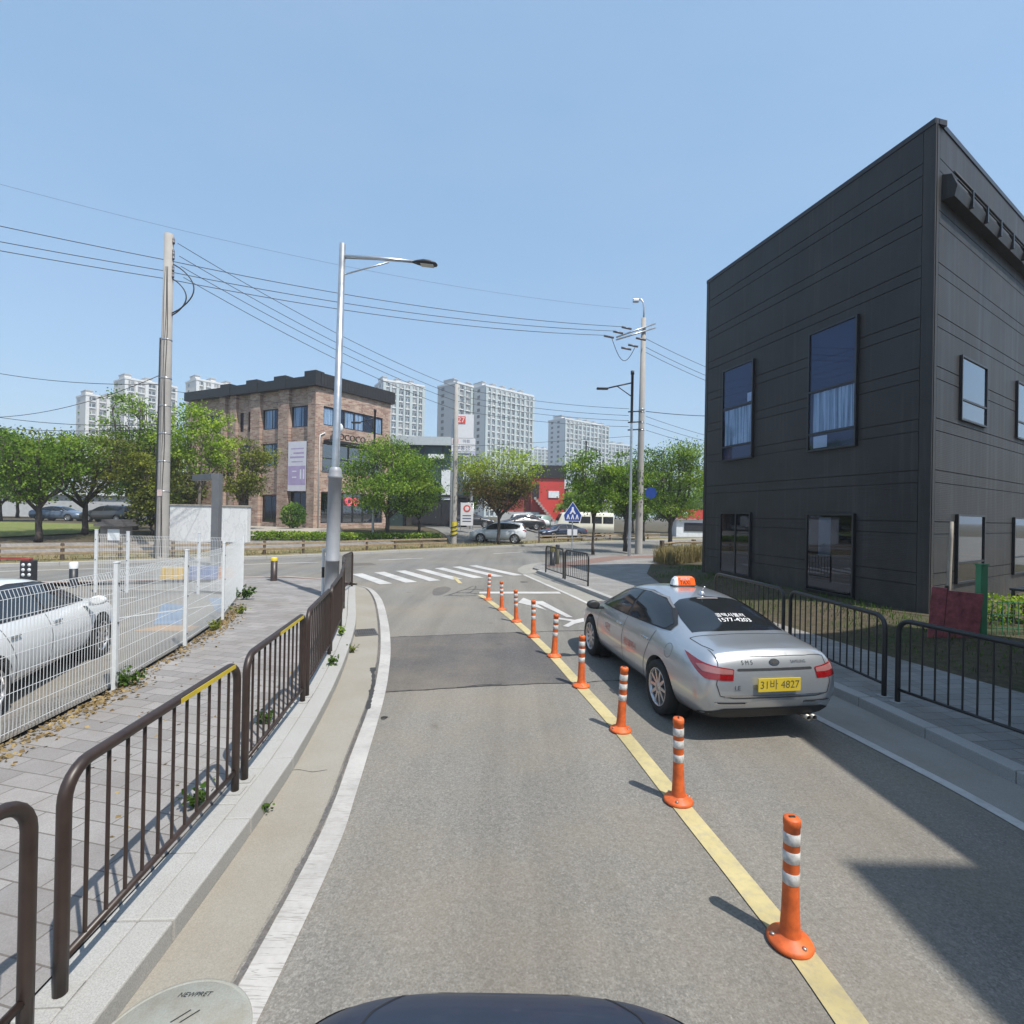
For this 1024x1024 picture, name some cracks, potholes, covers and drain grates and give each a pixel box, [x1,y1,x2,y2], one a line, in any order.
drain grate [354,628,378,637]
manhole cover [111,978,253,1024]
